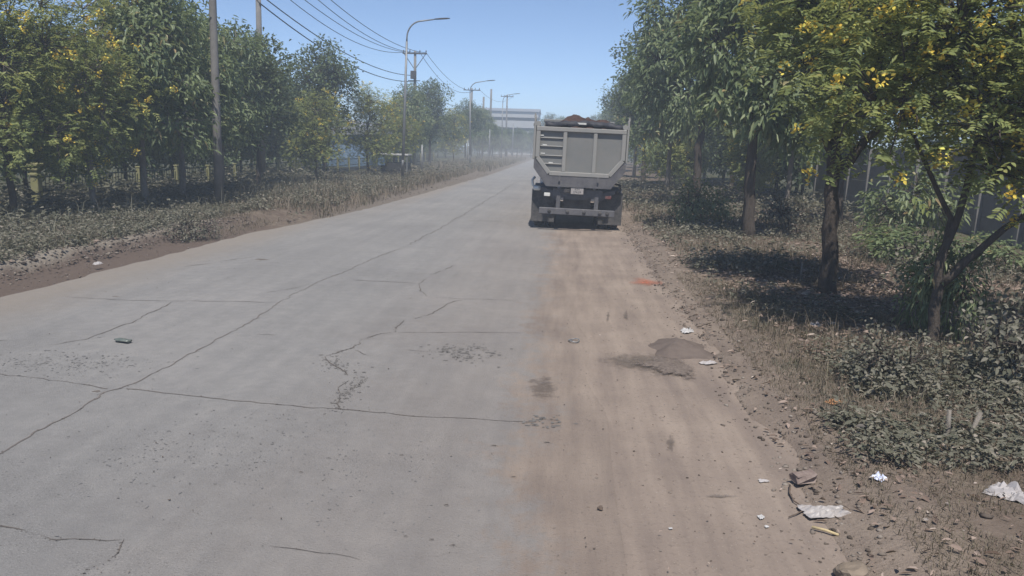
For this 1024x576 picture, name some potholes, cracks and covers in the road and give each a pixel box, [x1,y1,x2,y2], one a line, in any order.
crack [325,265,460,409]
crack [0,525,124,574]
pothole [522,415,578,428]
pothole [419,343,513,367]
